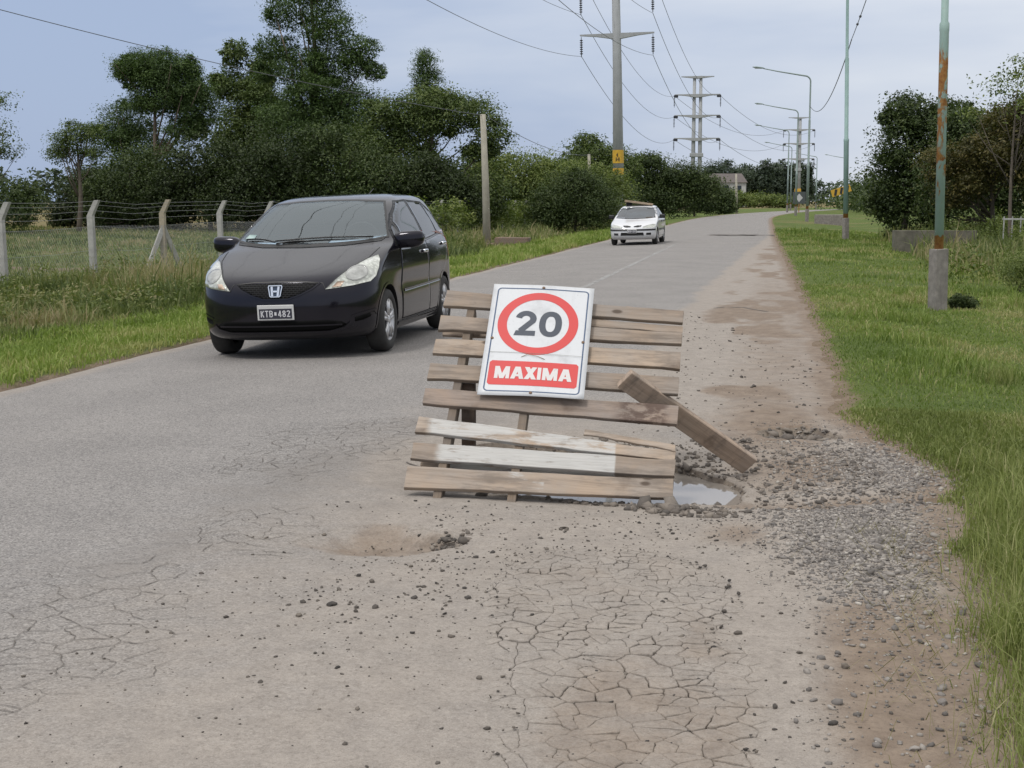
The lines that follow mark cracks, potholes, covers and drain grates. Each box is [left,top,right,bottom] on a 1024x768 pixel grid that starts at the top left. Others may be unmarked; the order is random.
pothole [456,438,761,509]
pothole [264,521,489,561]
crack [473,546,783,768]
crack [0,556,210,714]
crack [151,505,319,556]
pothole [743,424,853,444]
crack [213,418,422,484]
